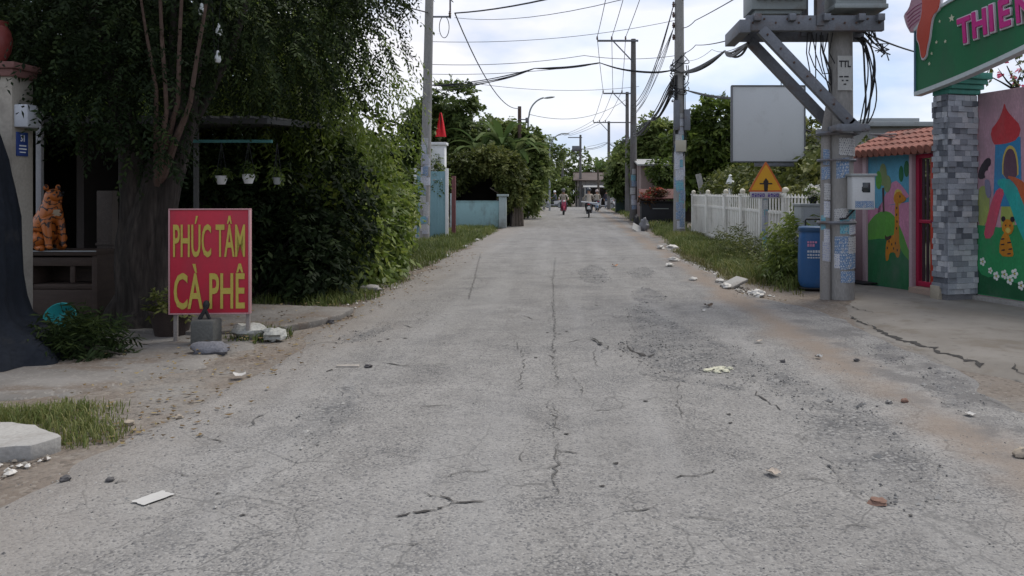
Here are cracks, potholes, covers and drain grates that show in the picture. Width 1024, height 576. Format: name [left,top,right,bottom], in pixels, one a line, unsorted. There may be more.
crack [521,262,609,392]
crack [850,315,984,367]
crack [392,468,495,517]
